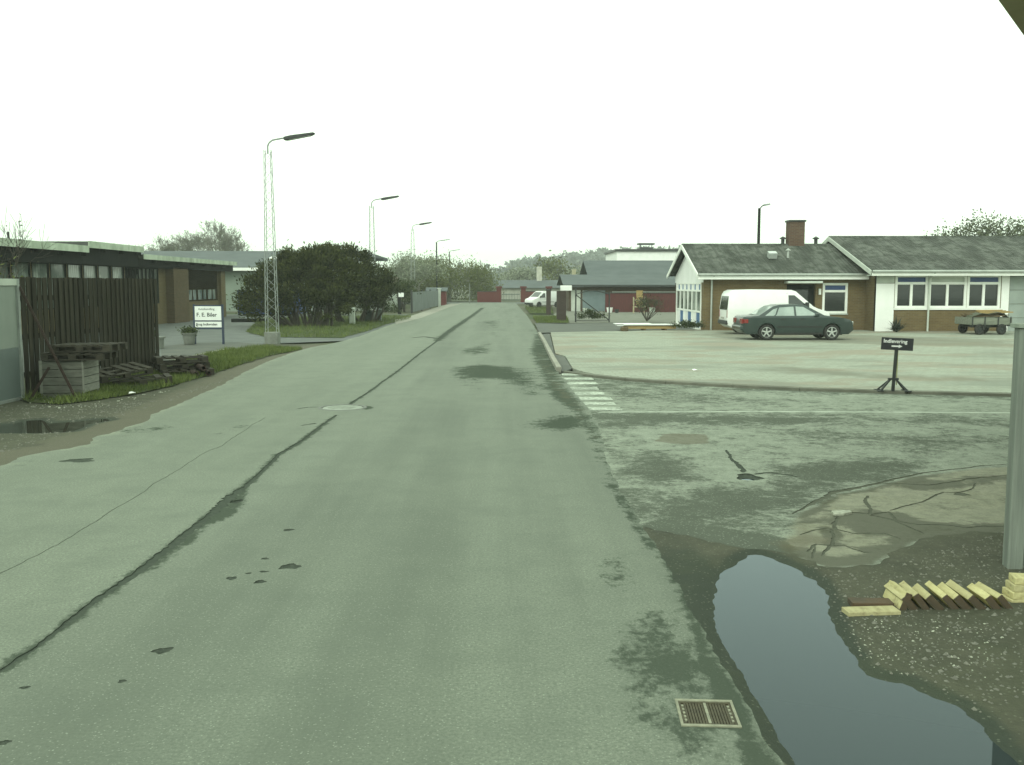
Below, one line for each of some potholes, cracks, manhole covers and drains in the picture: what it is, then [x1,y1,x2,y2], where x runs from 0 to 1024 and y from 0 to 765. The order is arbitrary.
crack [0,418,264,574]
drain grate [675,699,742,728]
crack [725,450,1007,558]
